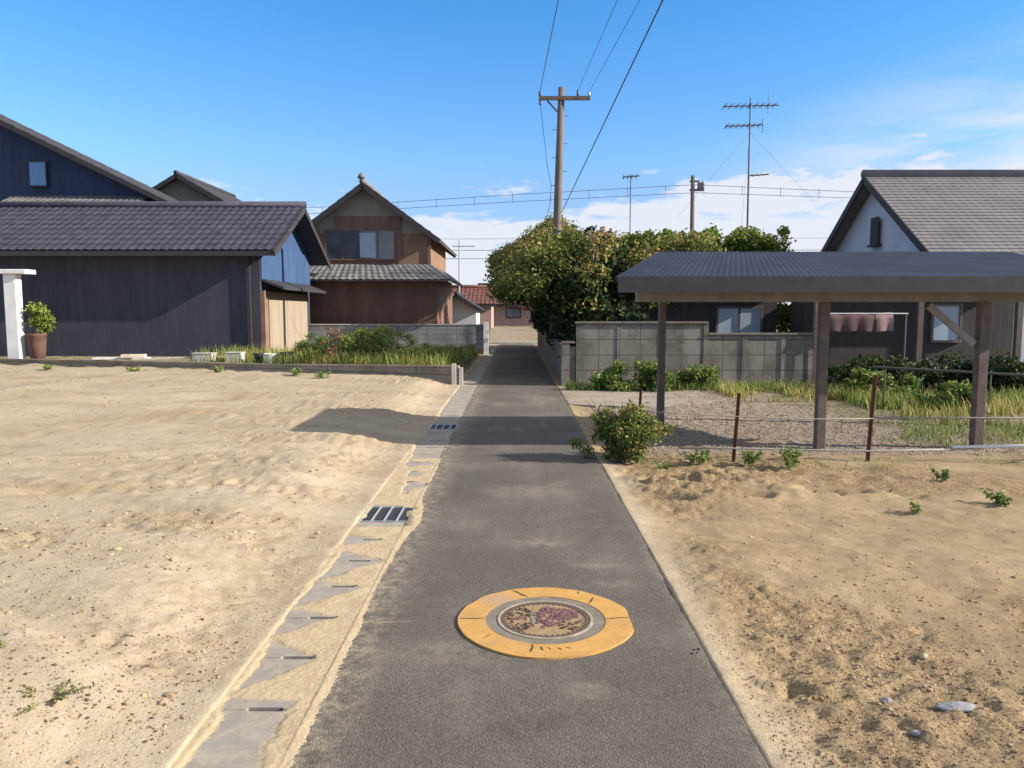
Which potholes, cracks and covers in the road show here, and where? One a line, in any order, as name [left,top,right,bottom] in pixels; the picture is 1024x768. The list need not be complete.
drain grate [359,506,415,522]
manhole cover [485,597,606,644]
